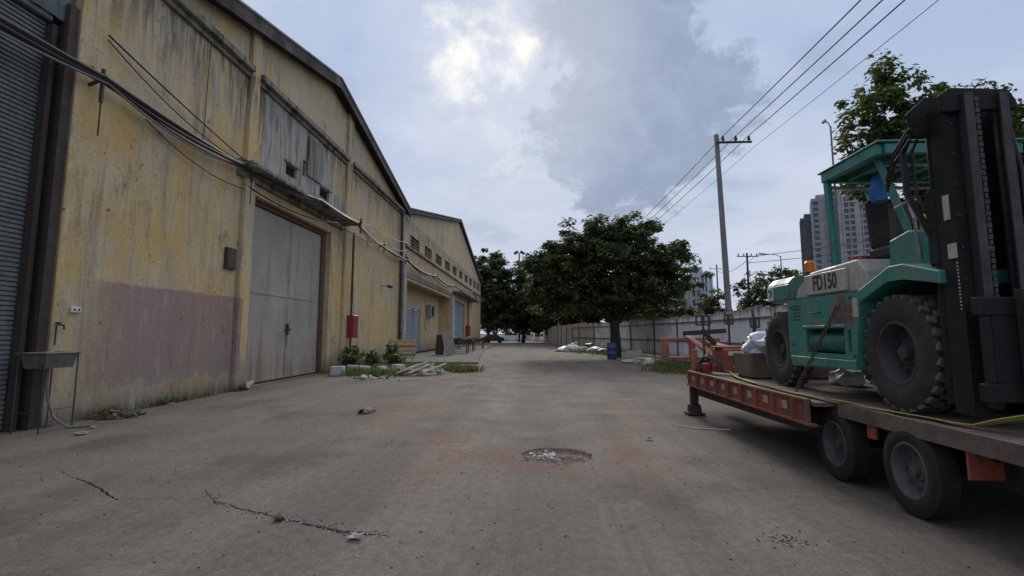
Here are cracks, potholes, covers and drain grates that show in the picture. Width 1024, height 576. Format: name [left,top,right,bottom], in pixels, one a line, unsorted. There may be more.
crack [62,471,146,500]
pothole [521,448,593,465]
crack [204,462,396,539]
